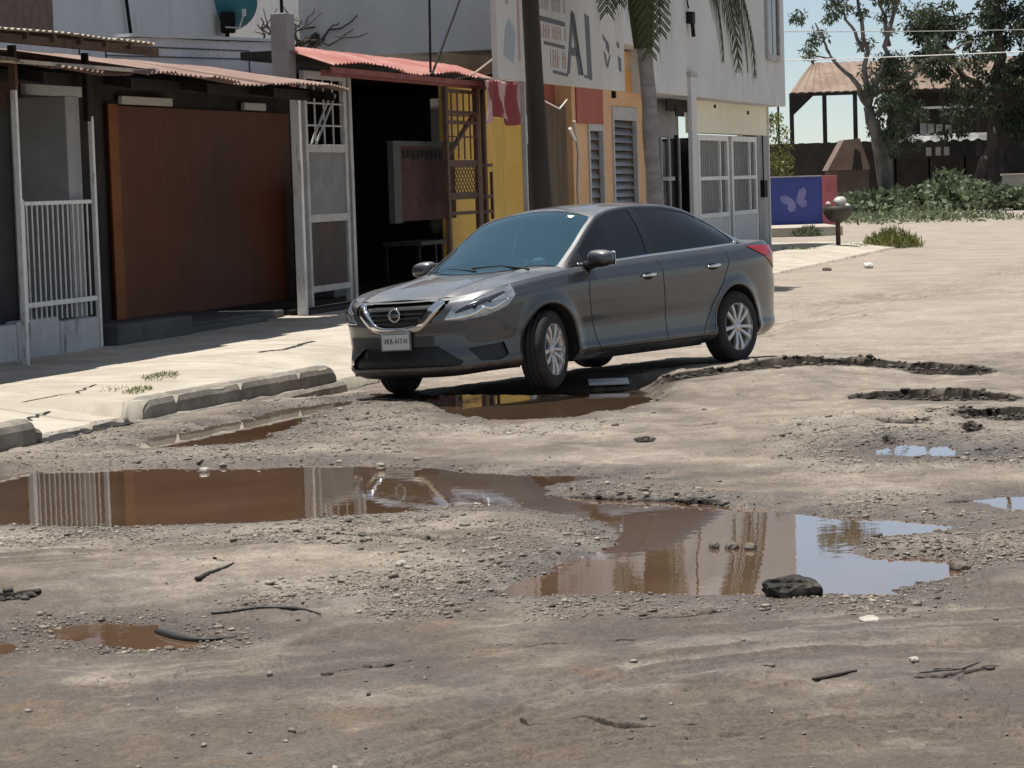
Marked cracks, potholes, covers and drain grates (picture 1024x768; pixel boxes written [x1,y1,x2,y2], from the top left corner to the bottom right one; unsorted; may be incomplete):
pothole [34,621,209,651]
pothole [0,462,642,528]
pothole [886,438,936,457]
pothole [495,496,974,597]
pothole [867,443,889,456]
pothole [858,388,1020,402]
pothole [367,382,658,420]
pothole [669,356,988,381]
pothole [136,398,362,449]
pothole [973,496,1024,510]
pothole [927,443,966,458]
